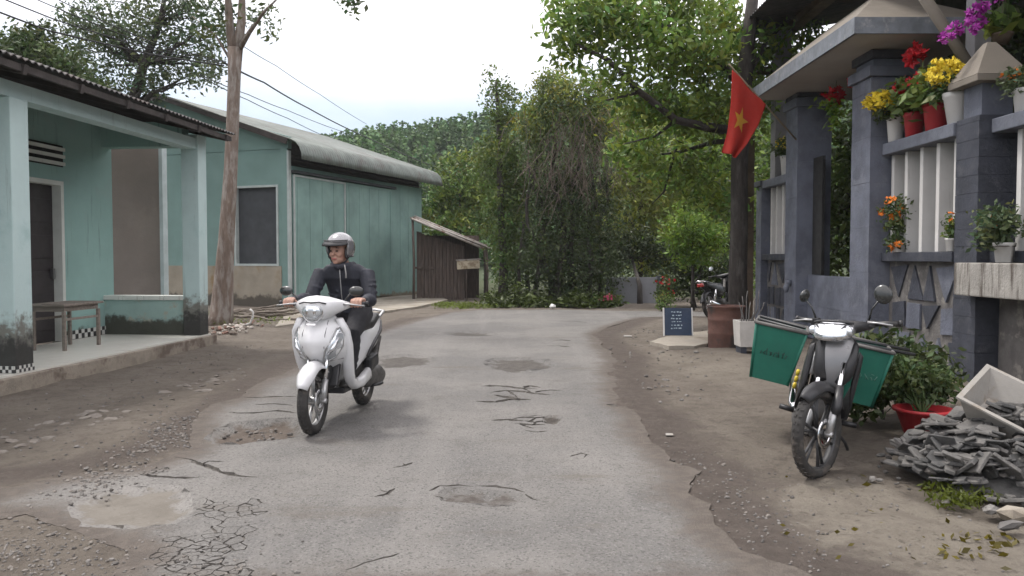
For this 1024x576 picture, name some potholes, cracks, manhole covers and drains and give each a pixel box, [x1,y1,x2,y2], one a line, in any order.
pothole [204,417,307,445]
pothole [67,484,193,529]
crack [346,553,399,570]
crack [233,396,296,414]
crack [149,499,268,576]
pothole [438,487,524,507]
crack [140,457,252,479]
crack [476,385,557,432]
